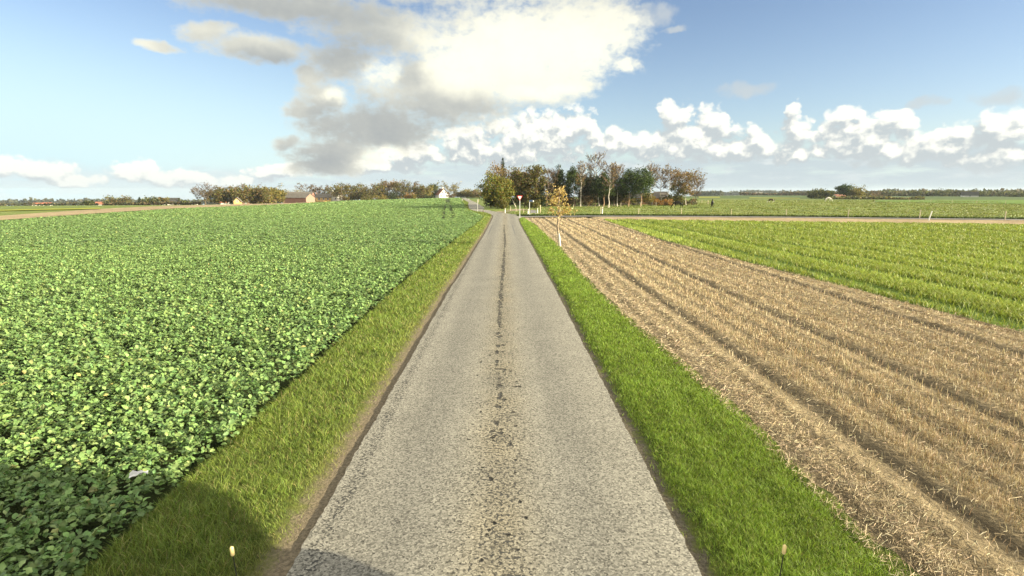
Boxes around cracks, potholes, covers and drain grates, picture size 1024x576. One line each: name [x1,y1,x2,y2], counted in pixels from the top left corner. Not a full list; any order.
crack [467,226,528,562]
